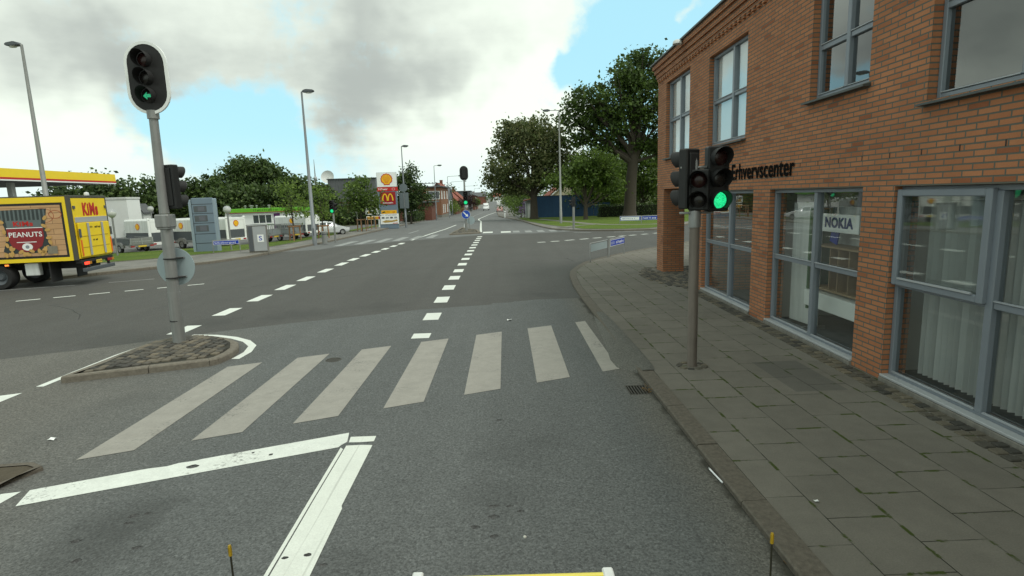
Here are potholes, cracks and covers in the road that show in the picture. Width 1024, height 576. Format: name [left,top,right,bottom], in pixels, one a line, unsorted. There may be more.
drain grate [625,385,654,395]
